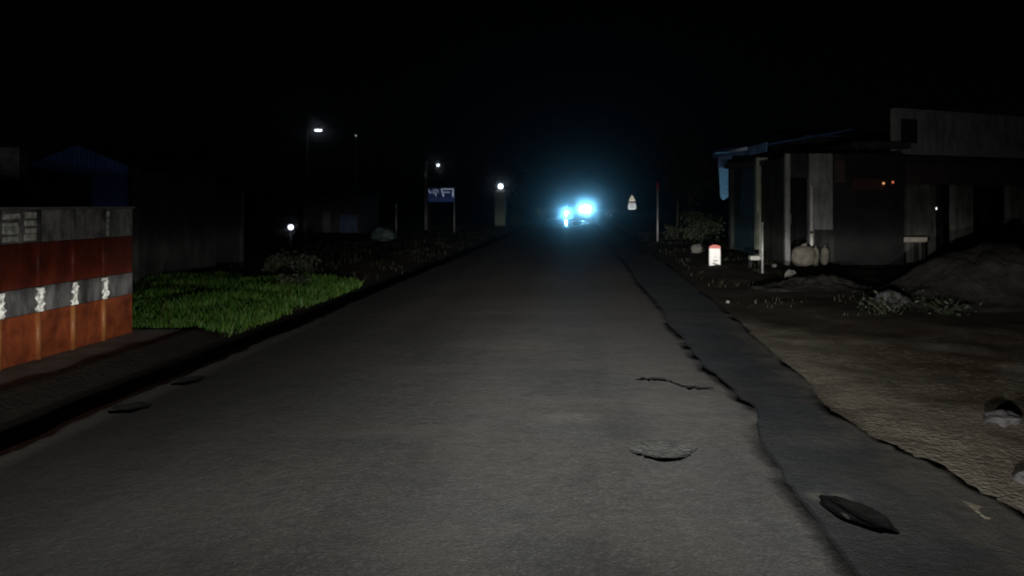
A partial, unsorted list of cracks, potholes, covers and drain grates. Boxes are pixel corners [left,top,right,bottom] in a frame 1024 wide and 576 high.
crack [635,377,714,390]
pothole [171,375,205,386]
pothole [628,440,698,462]
pothole [107,402,152,414]
pothole [819,495,900,535]
